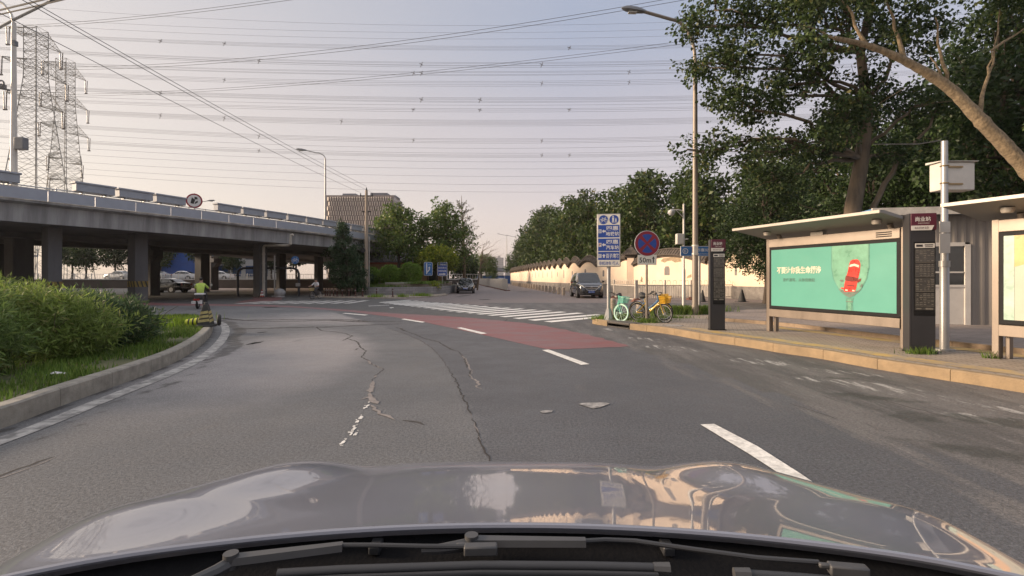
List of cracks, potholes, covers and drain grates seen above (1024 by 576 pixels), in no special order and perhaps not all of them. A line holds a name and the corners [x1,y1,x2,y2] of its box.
crack [221,318,482,425]
crack [0,456,55,478]
